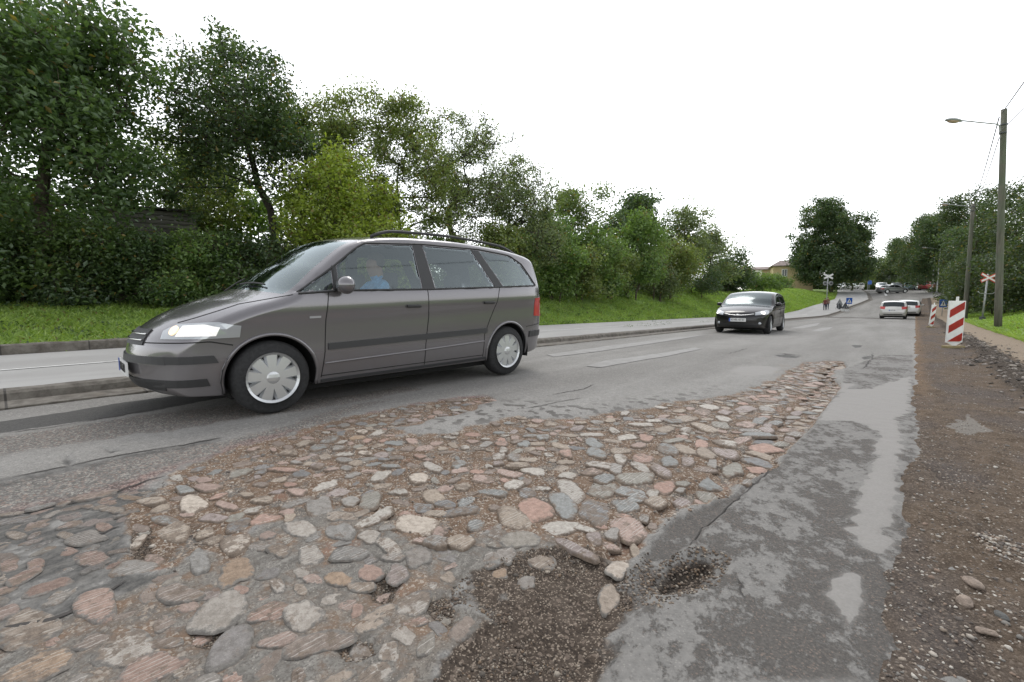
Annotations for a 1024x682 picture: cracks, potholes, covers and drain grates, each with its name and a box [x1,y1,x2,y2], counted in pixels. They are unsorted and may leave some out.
crack [690,470,769,543]
pothole [336,638,376,664]
pothole [429,541,634,682]
pothole [645,550,726,596]
pothole [128,524,154,560]
pothole [368,570,398,606]
